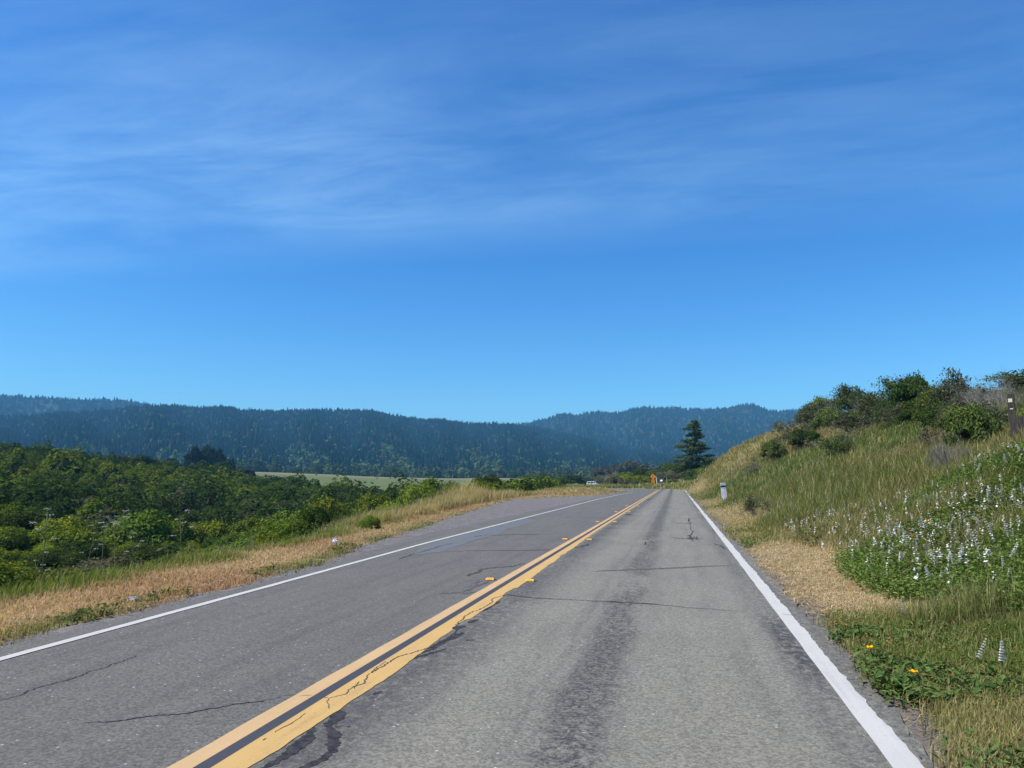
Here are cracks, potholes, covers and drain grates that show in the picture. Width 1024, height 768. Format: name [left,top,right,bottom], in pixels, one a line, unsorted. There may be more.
crack [508,594,730,611]
crack [682,518,725,549]
crack [399,534,549,594]
crack [0,655,136,700]
